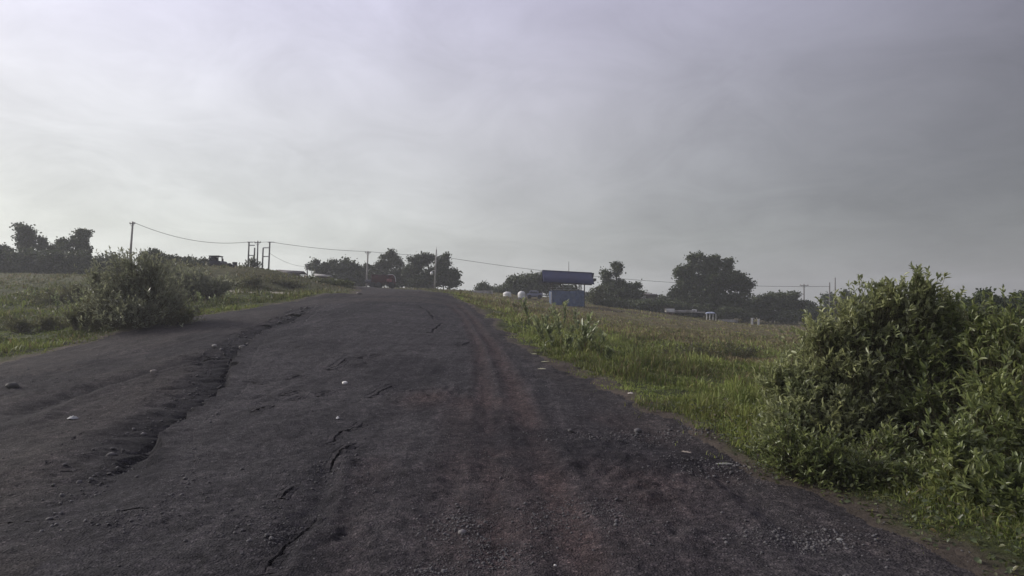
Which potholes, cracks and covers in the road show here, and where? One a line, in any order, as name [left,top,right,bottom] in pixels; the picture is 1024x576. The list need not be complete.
crack [411,305,476,346]
crack [0,304,401,576]
